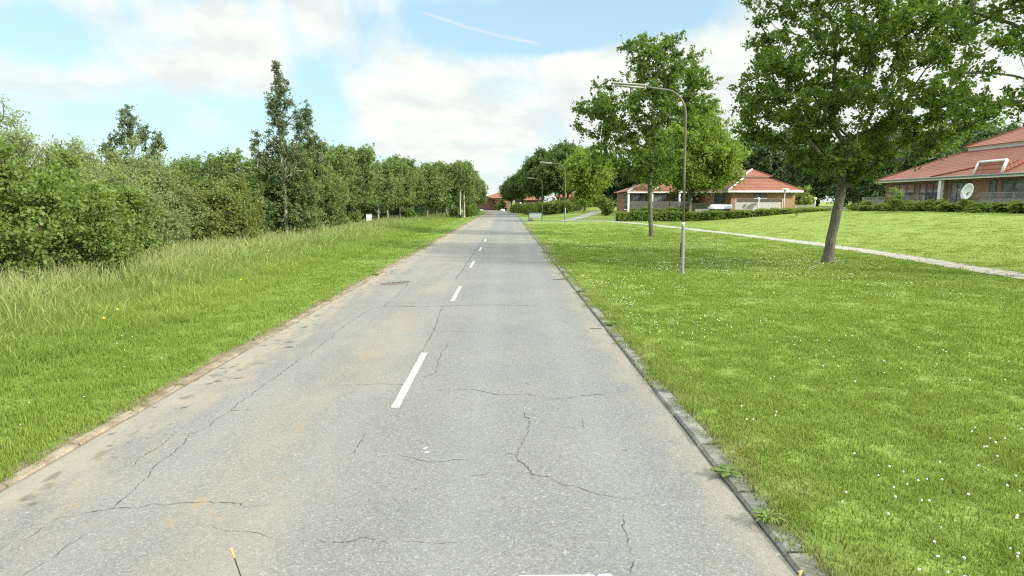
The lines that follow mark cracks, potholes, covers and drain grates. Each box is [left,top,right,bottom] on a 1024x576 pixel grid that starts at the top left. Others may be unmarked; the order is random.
crack [2,288,528,548]
crack [480,414,632,499]
